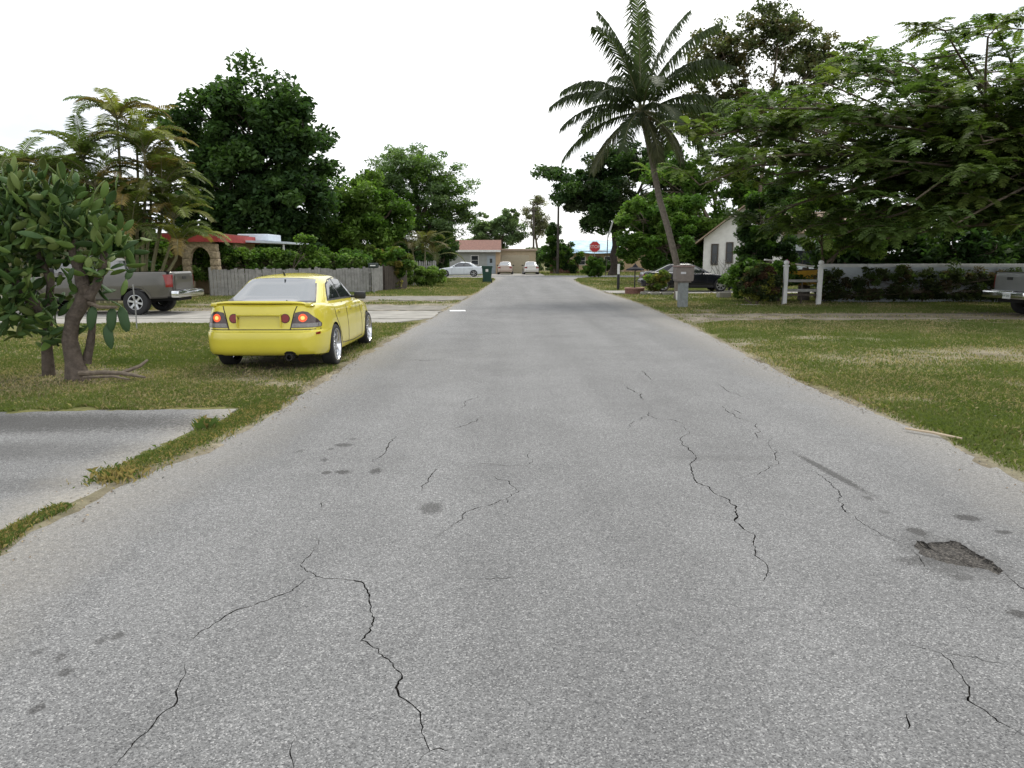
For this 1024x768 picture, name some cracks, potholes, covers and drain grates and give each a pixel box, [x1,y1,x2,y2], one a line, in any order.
crack [194,538,446,758]
crack [651,416,769,580]
crack [923,648,1000,723]
pothole [914,540,1003,575]
crack [117,666,186,763]
crack [811,470,925,567]
